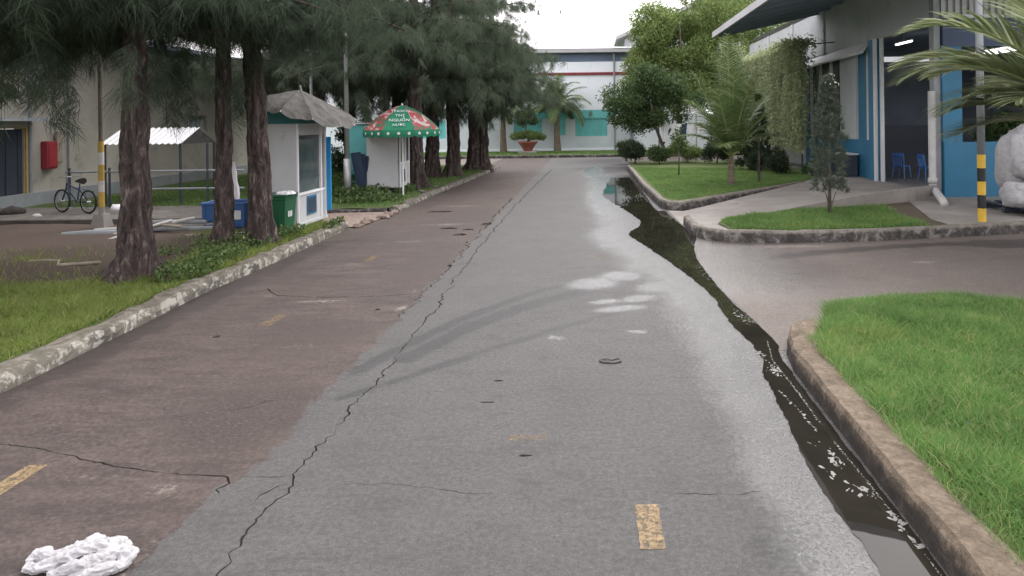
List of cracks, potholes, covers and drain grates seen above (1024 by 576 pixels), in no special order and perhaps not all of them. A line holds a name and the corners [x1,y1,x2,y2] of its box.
crack [1,170,552,576]
